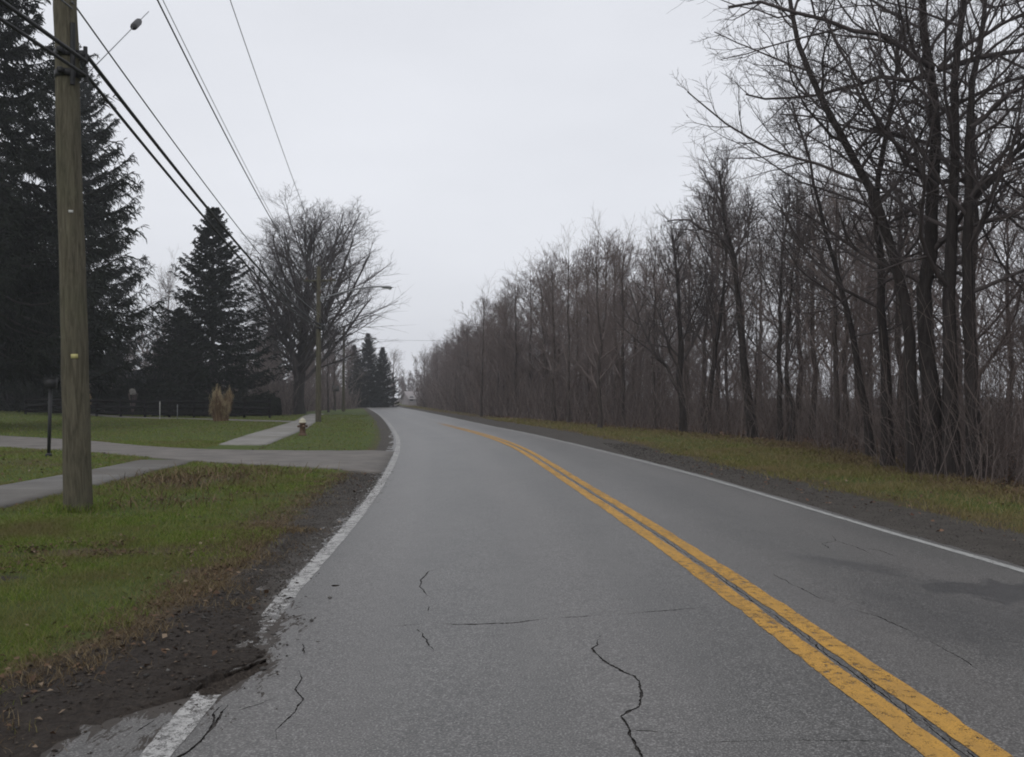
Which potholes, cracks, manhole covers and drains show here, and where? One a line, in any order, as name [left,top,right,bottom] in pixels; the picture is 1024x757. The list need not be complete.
crack [591,635,655,757]
crack [453,609,681,625]
crack [177,644,305,757]
